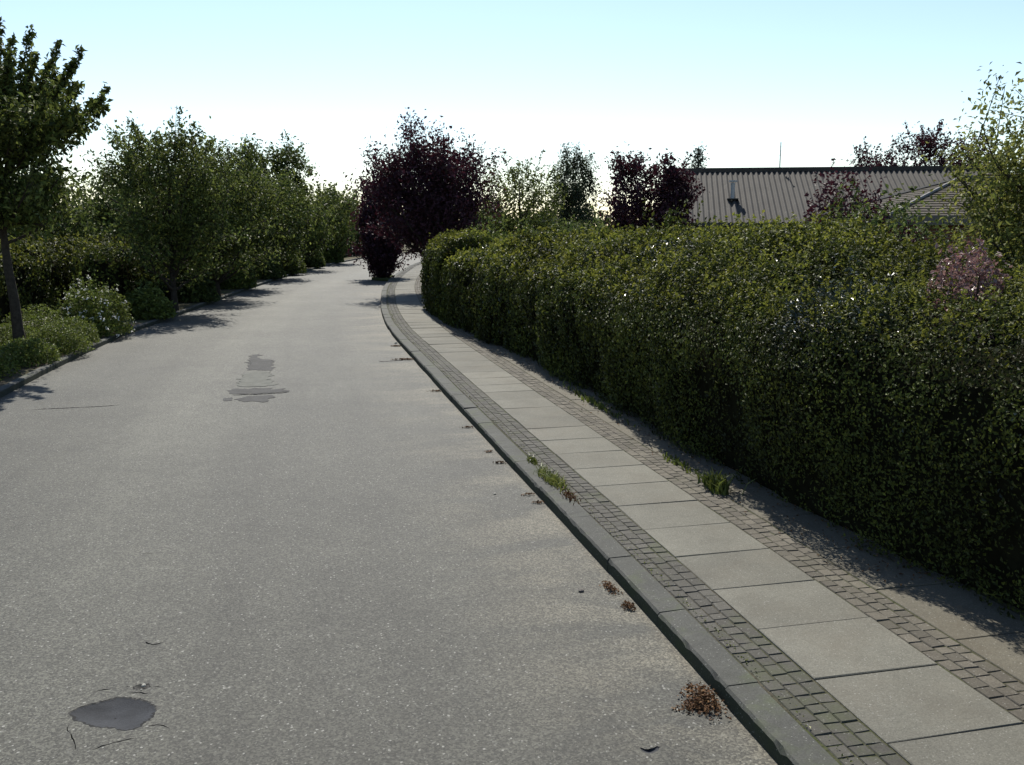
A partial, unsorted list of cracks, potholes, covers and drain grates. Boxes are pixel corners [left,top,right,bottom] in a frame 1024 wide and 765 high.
crack [93,724,168,750]
